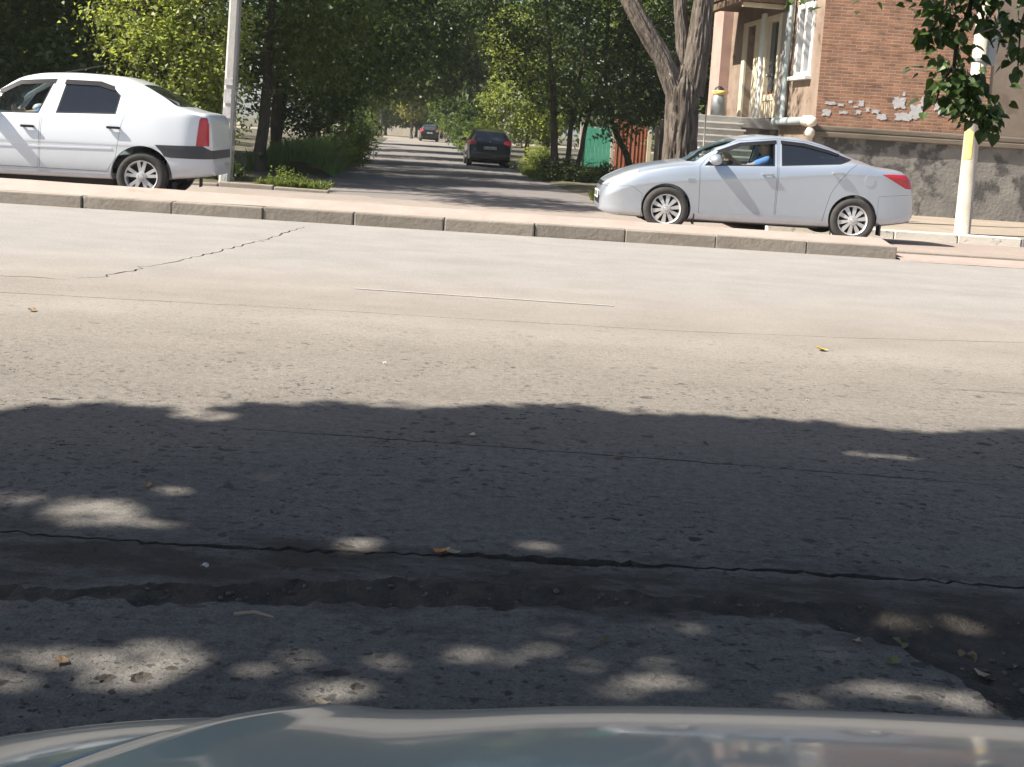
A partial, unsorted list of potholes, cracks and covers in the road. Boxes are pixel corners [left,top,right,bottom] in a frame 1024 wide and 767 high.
pothole [0,576,1024,719]
crack [0,530,1024,589]
crack [190,424,1024,488]
crack [0,227,1021,343]
